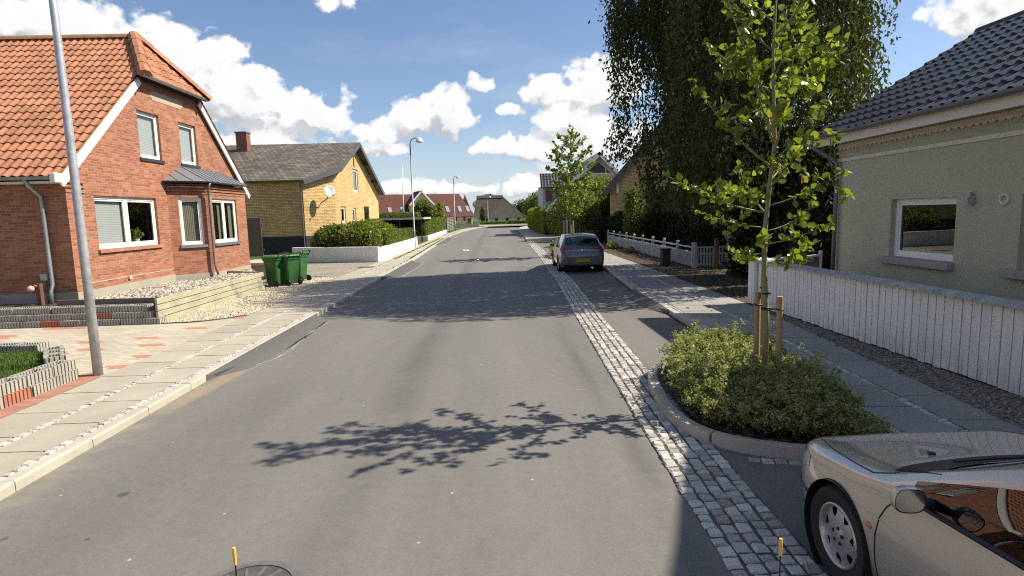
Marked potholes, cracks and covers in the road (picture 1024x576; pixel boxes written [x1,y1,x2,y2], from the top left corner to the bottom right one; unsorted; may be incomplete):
manhole cover [214,561,301,576]
